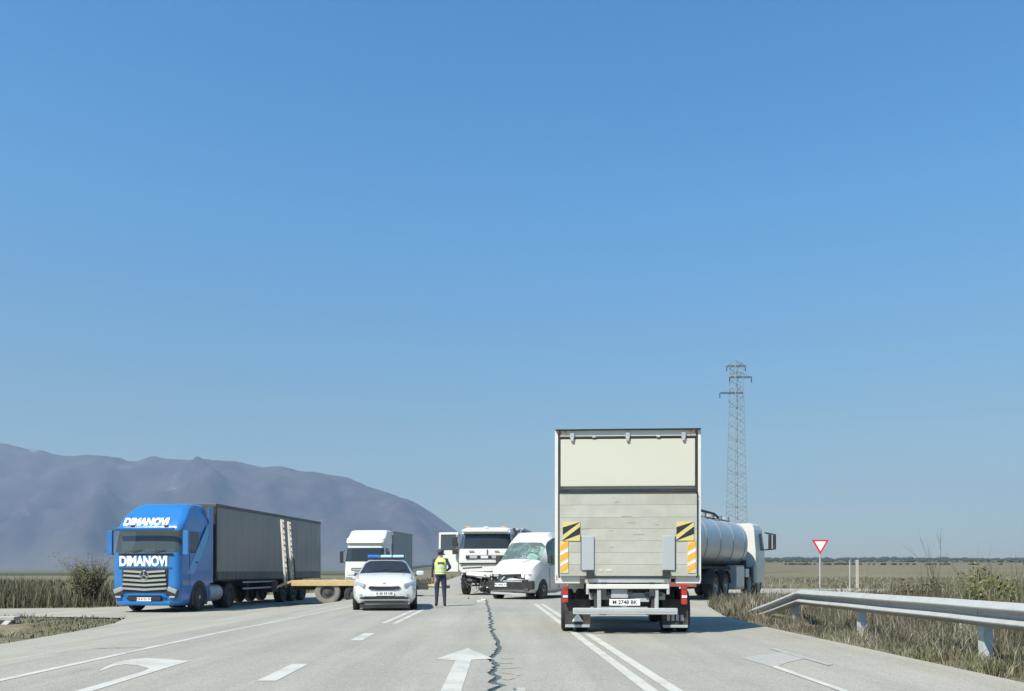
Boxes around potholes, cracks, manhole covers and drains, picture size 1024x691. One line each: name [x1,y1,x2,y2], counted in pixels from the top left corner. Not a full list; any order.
crack [485,599,519,691]
